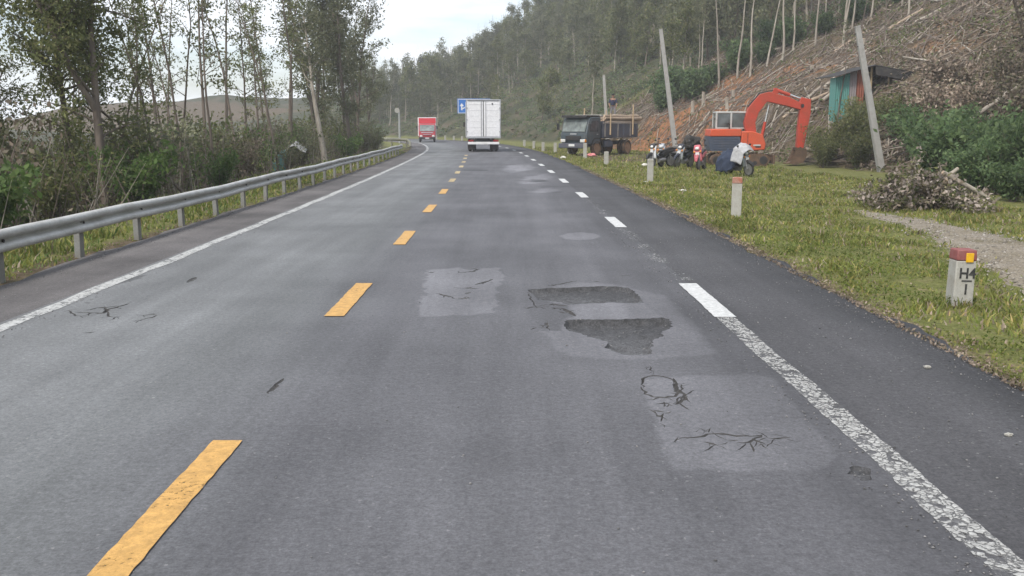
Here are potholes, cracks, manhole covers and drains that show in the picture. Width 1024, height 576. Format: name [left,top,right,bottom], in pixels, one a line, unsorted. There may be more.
crack [64,304,155,333]
crack [267,378,284,394]
pothole [528,286,642,305]
crack [641,366,793,452]
crack [525,281,598,330]
pothole [847,465,872,481]
crack [428,268,502,299]
pothole [564,318,673,355]
